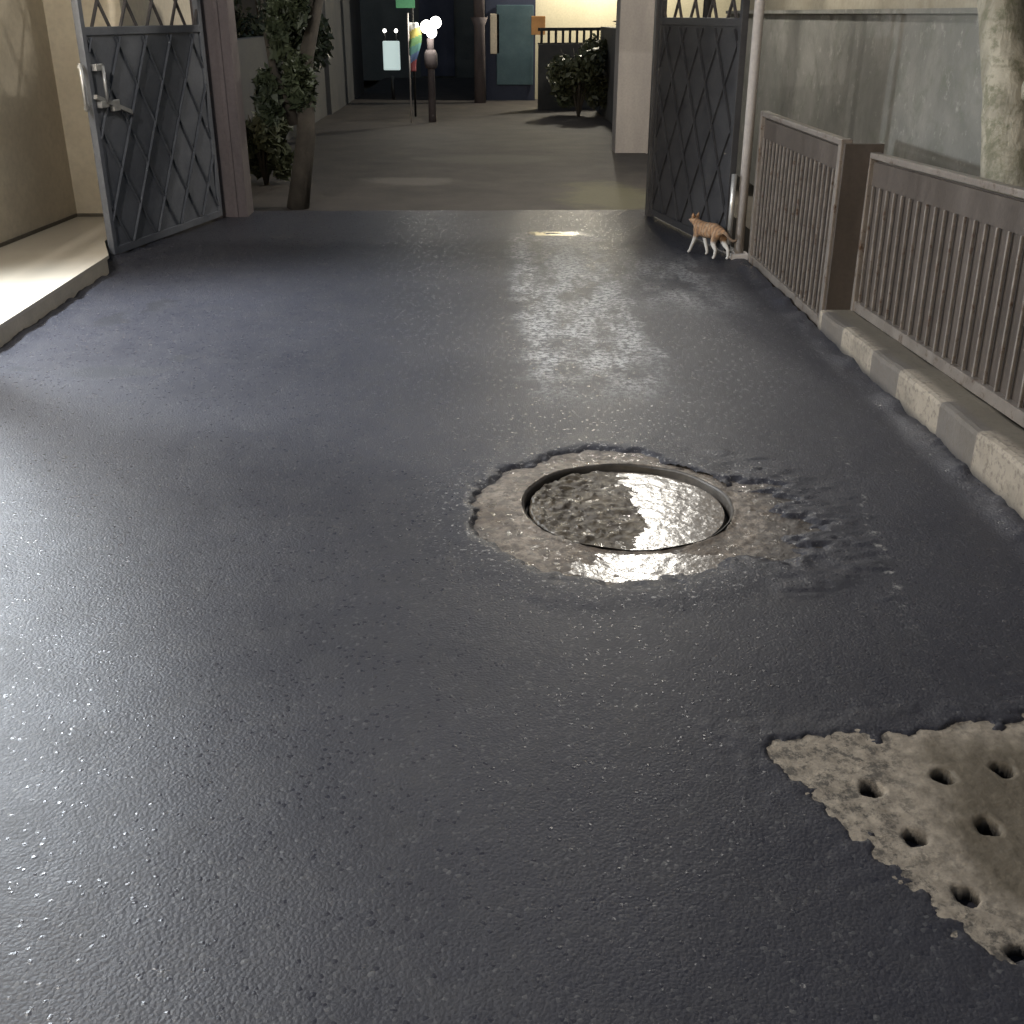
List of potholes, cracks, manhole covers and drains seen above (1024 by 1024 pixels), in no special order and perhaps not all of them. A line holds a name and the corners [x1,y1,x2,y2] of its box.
manhole cover [471,450,823,585]
